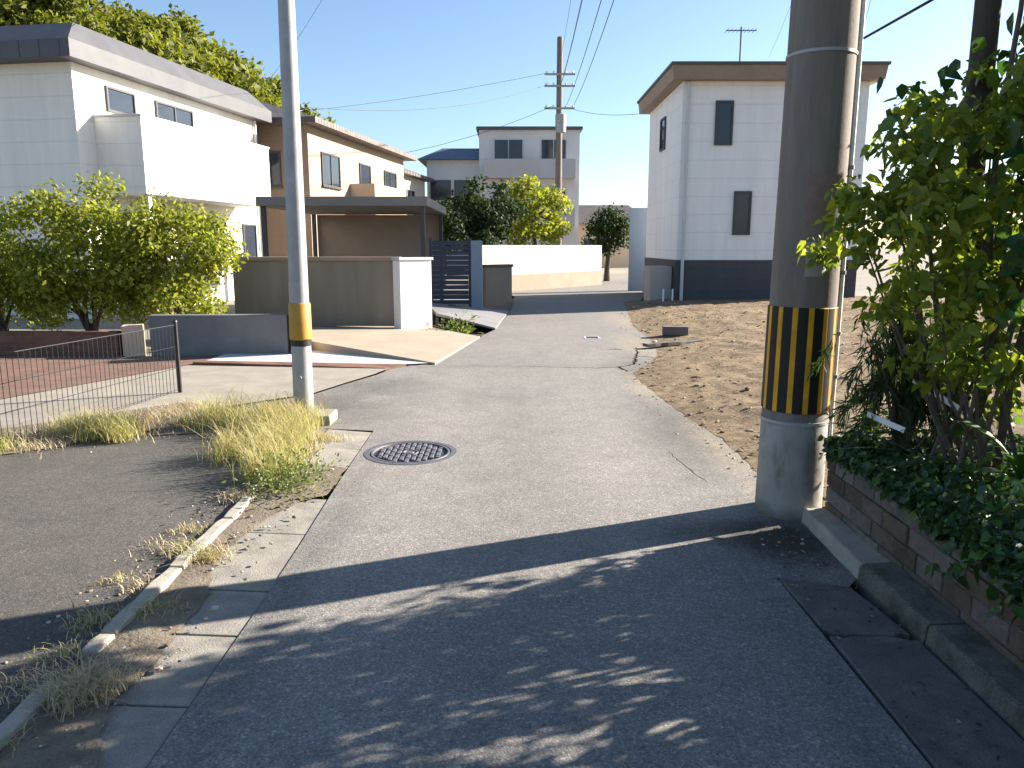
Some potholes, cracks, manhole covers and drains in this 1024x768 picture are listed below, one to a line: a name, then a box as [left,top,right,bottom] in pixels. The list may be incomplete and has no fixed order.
manhole cover [364,440,457,465]
crack [532,347,654,371]
